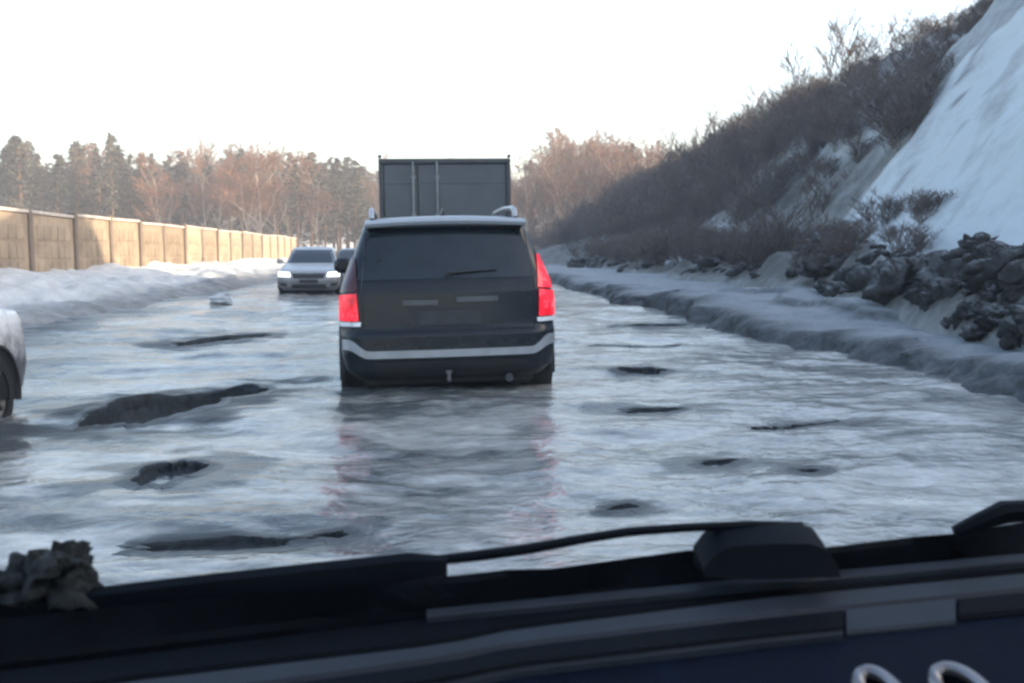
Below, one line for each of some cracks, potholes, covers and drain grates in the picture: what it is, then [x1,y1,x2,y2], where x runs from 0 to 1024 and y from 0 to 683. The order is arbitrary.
pothole [607,366,677,377]
pothole [285,524,368,546]
pothole [686,458,752,470]
pothole [590,498,656,517]
pothole [68,383,277,431]
pothole [111,529,336,557]
pothole [113,458,224,491]
pothole [613,405,694,416]
pothole [159,332,283,348]
pothole [783,466,837,476]
